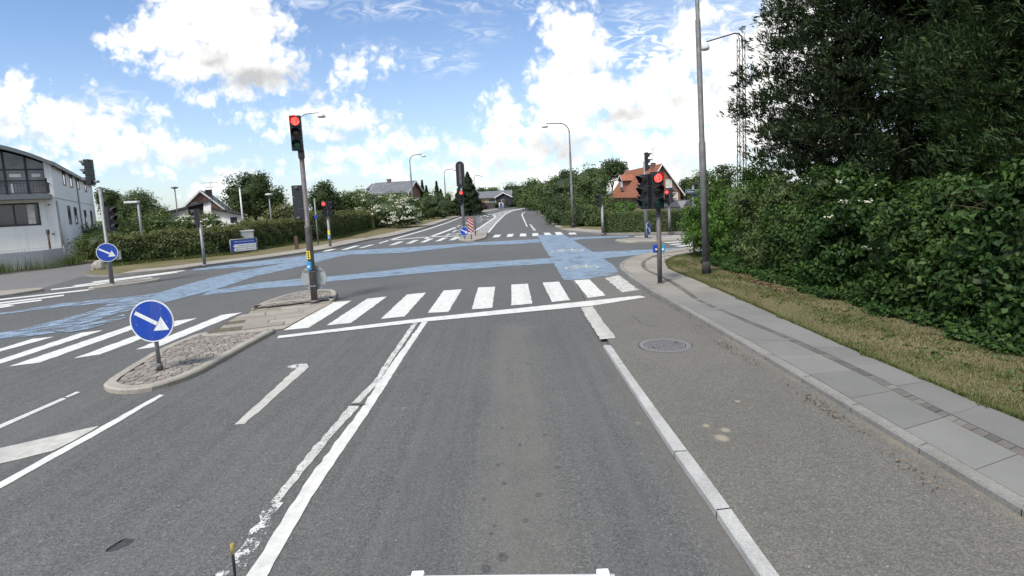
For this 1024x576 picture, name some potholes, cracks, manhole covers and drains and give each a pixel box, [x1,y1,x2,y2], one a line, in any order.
manhole cover [638,339,692,352]
pothole [105,538,135,552]
